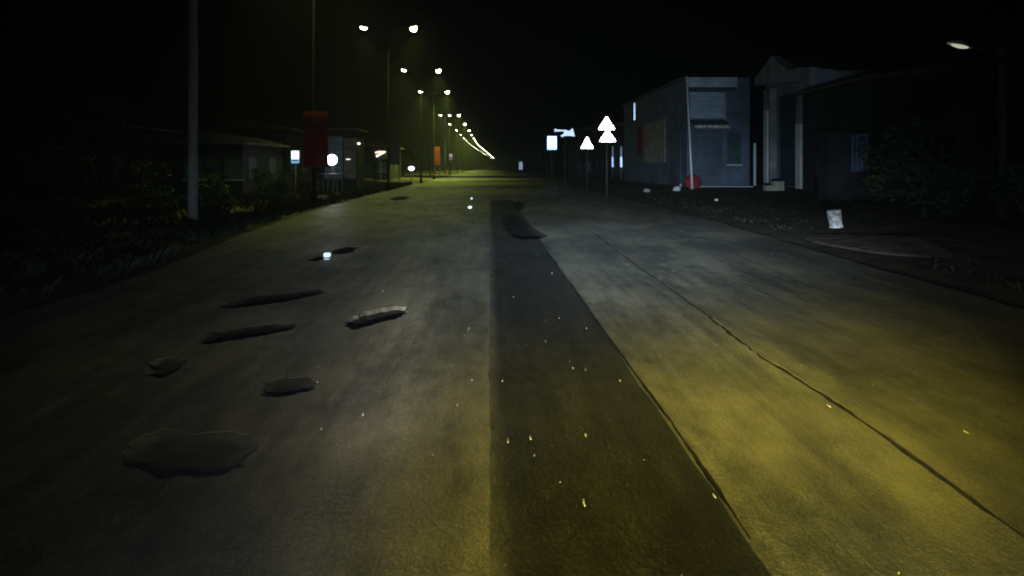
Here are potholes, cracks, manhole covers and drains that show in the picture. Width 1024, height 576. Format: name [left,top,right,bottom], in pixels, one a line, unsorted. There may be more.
pothole [200,324,298,345]
pothole [219,289,326,309]
pothole [142,357,189,378]
crack [596,234,1024,537]
pothole [260,376,316,398]
pothole [120,428,259,480]
pothole [344,306,409,330]
pothole [500,213,547,240]
